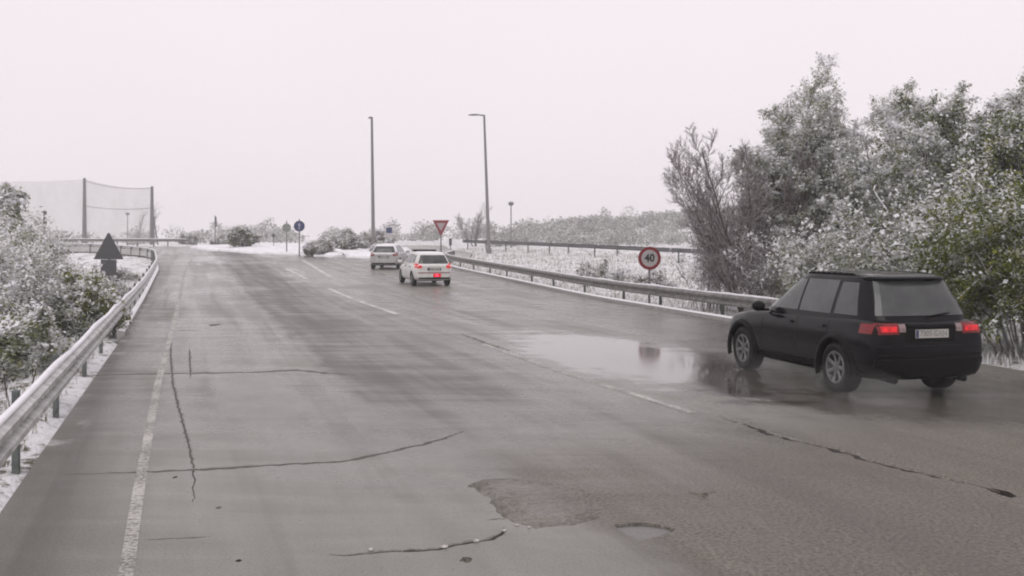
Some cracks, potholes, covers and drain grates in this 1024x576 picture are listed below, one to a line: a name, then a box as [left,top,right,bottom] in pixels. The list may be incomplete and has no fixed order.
pothole [468,478,604,529]
crack [723,418,1000,495]
crack [65,330,464,502]
crack [328,518,506,556]
crack [461,334,510,351]
pothole [614,523,676,540]
